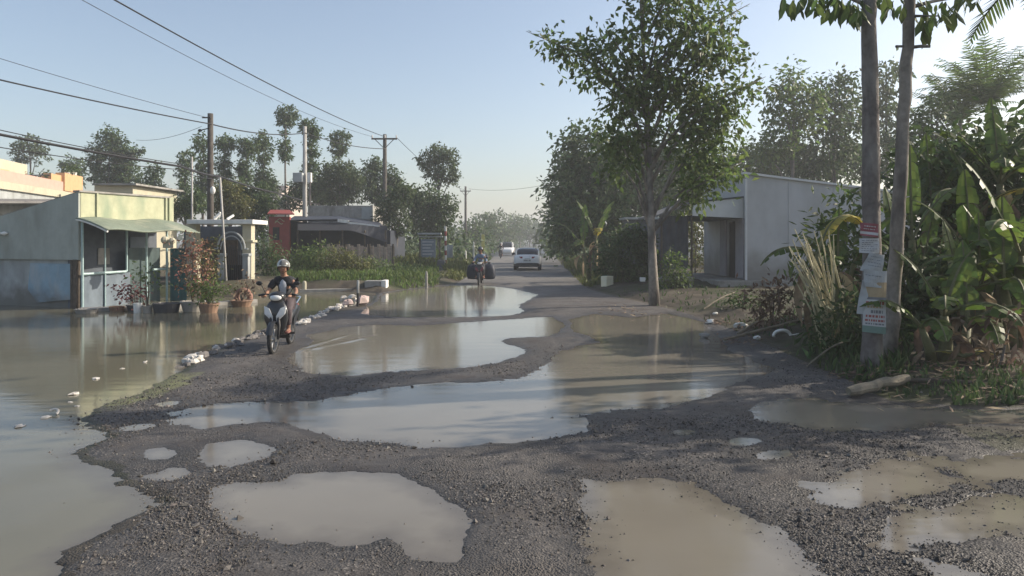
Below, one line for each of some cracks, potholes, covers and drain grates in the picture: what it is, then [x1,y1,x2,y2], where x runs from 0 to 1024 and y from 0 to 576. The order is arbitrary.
pothole [787,448,1003,512]
pothole [358,285,541,318]
pothole [567,473,849,576]
pothole [565,313,735,350]
pothole [186,465,487,570]
pothole [277,316,569,376]
pothole [896,552,1006,576]
pothole [151,342,790,450]
pothole [127,462,205,485]
pothole [185,435,294,471]
pothole [740,394,1024,436]
